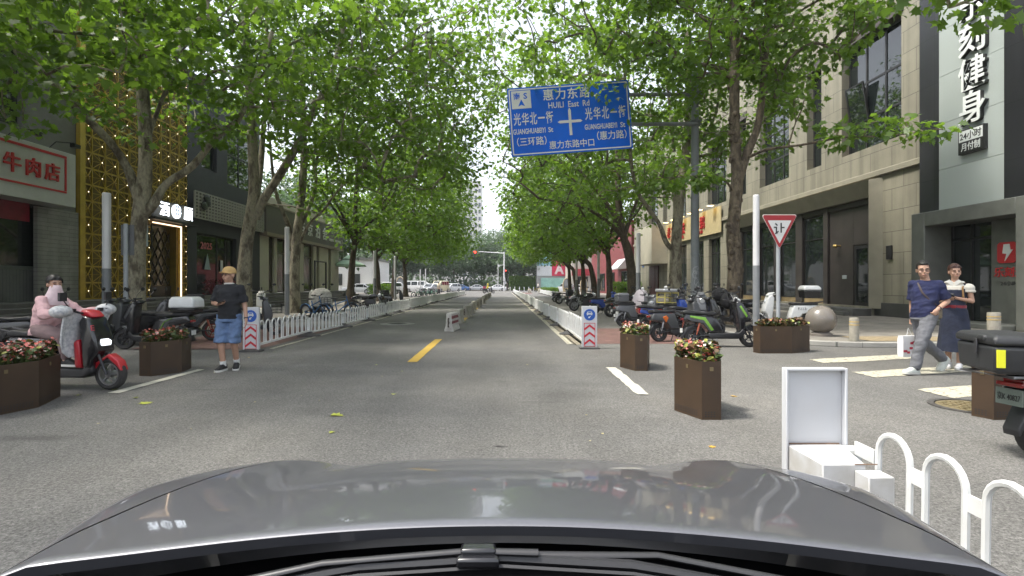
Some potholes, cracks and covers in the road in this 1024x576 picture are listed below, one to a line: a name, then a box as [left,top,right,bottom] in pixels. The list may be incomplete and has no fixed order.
manhole cover [927,398,971,414]
